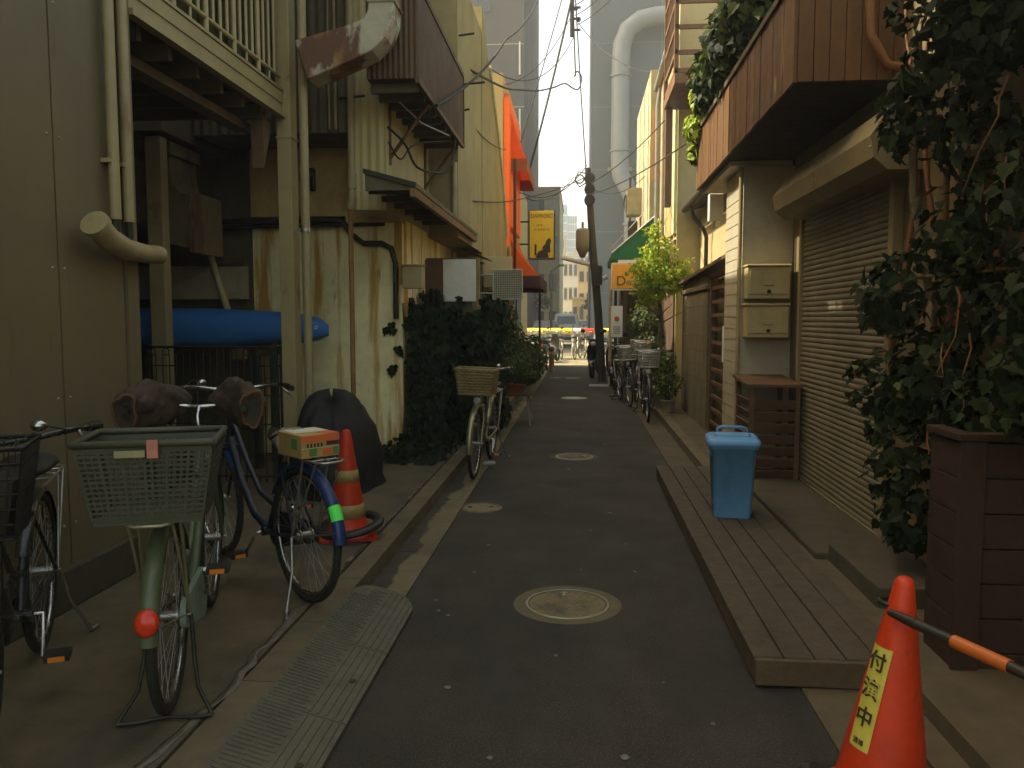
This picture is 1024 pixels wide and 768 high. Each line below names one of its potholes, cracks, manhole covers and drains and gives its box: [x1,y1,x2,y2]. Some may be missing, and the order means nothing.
manhole cover [513,586,622,625]
manhole cover [461,502,502,513]
manhole cover [550,452,599,461]
